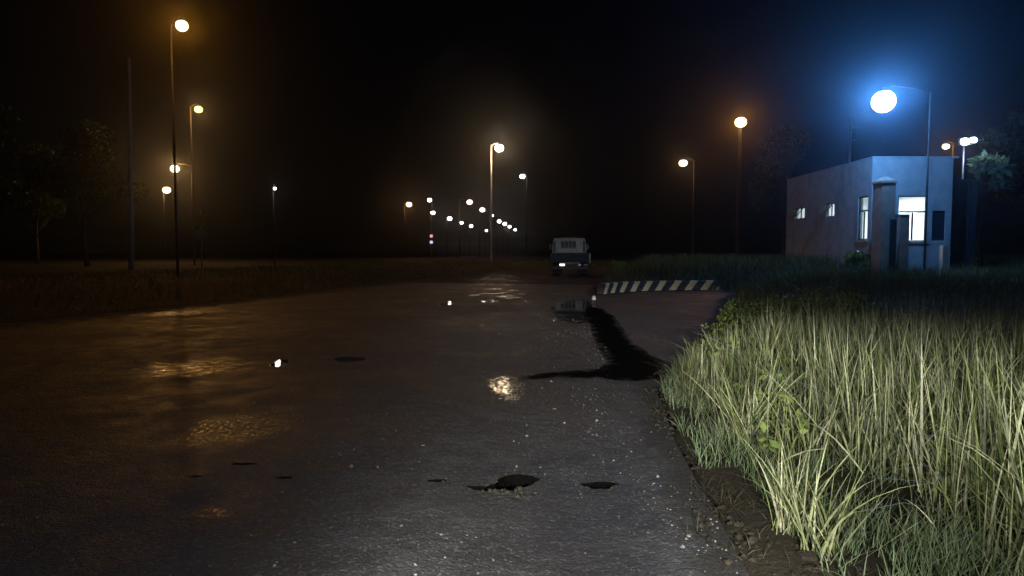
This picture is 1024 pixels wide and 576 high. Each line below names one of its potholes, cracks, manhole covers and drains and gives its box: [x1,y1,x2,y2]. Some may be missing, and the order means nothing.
pothole [462,472,540,500]
pothole [578,480,619,490]
